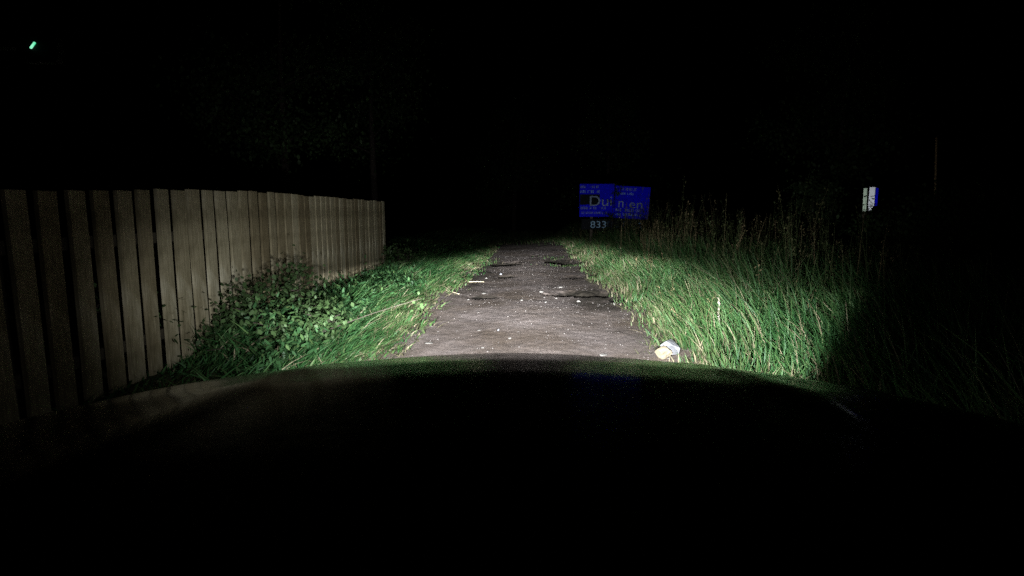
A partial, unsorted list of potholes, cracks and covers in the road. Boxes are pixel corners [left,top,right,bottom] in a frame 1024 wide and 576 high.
pothole [540,258,576,266]
pothole [539,290,615,298]
